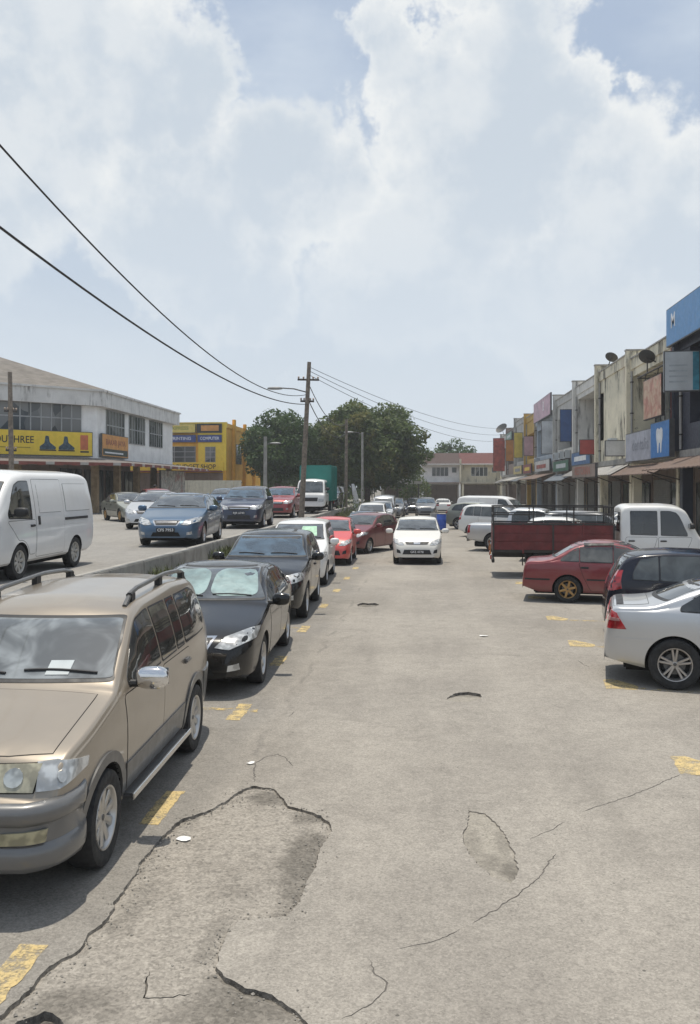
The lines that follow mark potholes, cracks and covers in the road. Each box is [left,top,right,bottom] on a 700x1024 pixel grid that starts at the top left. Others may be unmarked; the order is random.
crack [533,775,679,838]
crack [340,854,556,1020]
pothole [0,786,332,1024]
pothole [446,692,482,702]
pothole [463,811,519,883]
crack [253,754,293,782]
crack [143,976,189,999]
